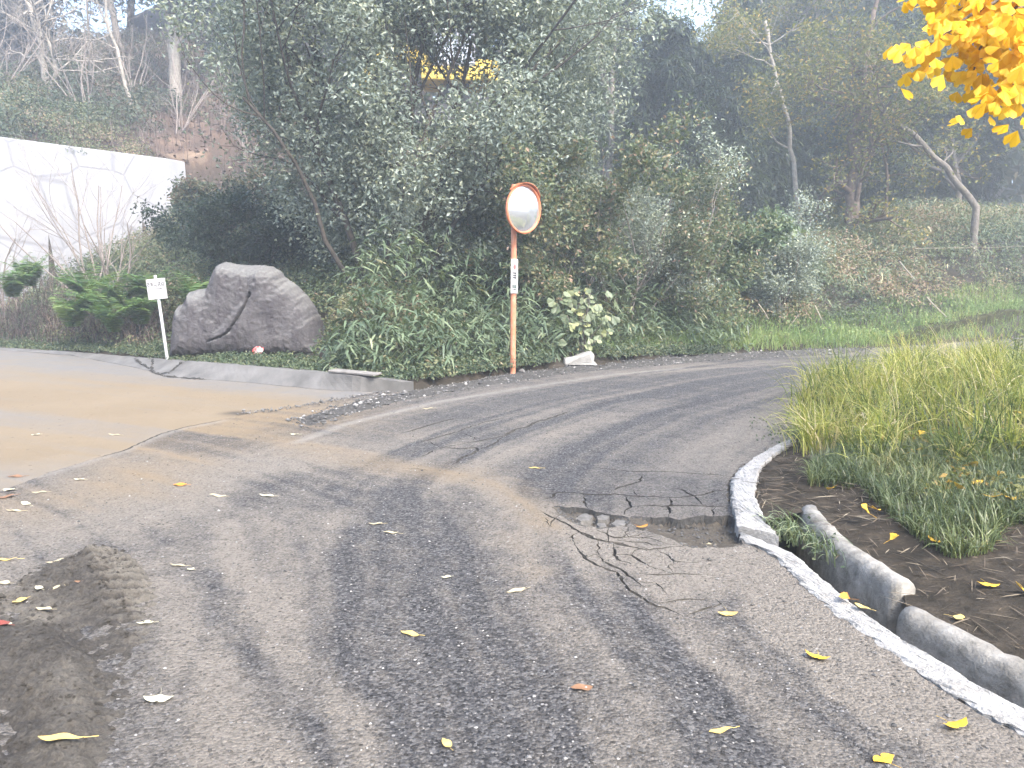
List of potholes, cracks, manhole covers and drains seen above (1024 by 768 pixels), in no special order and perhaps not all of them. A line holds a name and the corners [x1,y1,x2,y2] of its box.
crack [134,358,204,380]
crack [541,463,746,616]
crack [403,411,570,470]
pothole [552,506,630,529]
